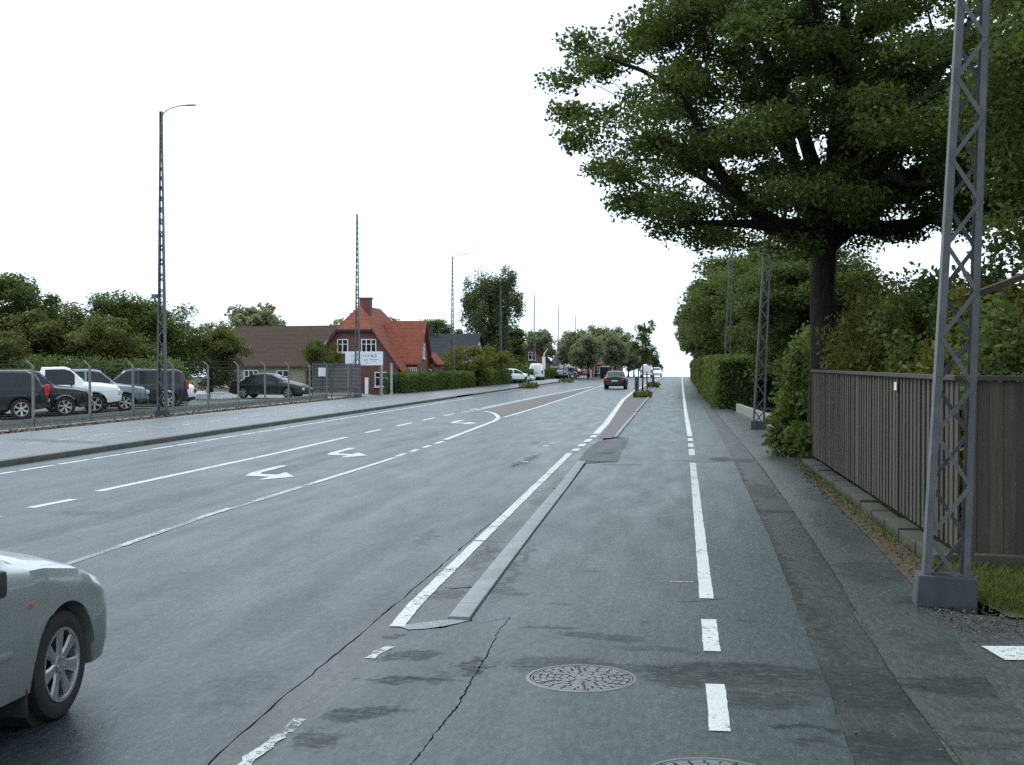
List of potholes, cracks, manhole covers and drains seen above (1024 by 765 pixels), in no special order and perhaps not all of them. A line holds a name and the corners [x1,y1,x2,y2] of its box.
manhole cover [526,664,637,692]
crack [207,507,510,765]
manhole cover [650,757,754,765]
